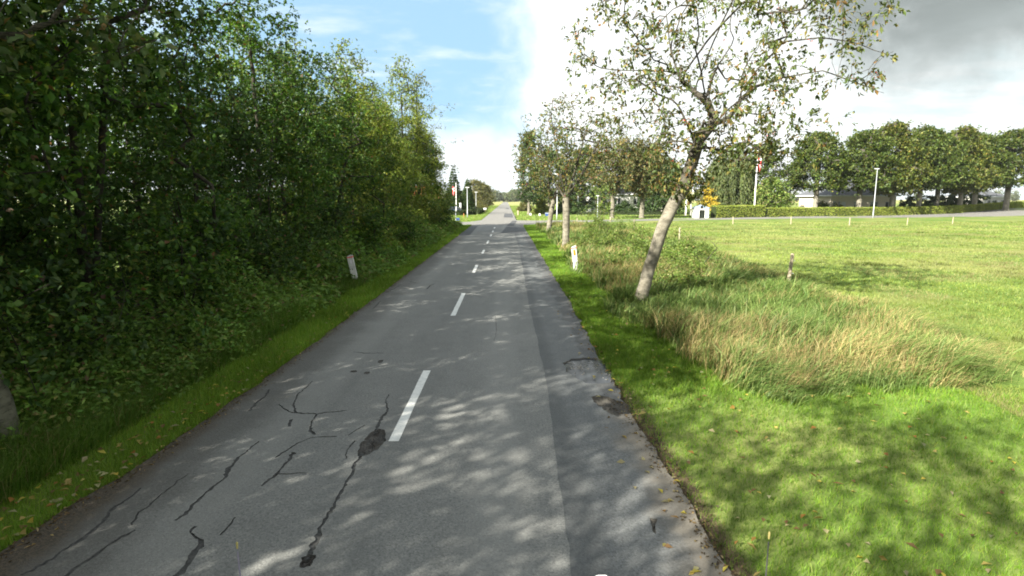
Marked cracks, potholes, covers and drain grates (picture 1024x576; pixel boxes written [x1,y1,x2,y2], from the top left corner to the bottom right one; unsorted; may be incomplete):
pothole [358,429,386,457]
crack [20,381,389,576]
pothole [592,395,631,417]
